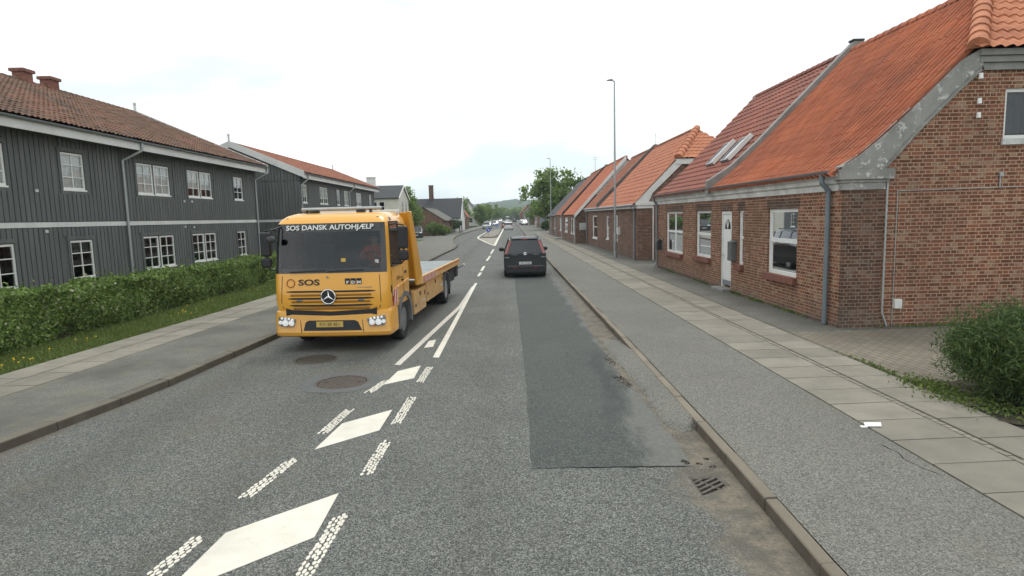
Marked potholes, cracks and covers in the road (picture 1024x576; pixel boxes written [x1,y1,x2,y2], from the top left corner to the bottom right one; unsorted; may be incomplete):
manhole cover [299,372,383,393]
manhole cover [293,354,338,365]
drain grate [688,475,731,496]
